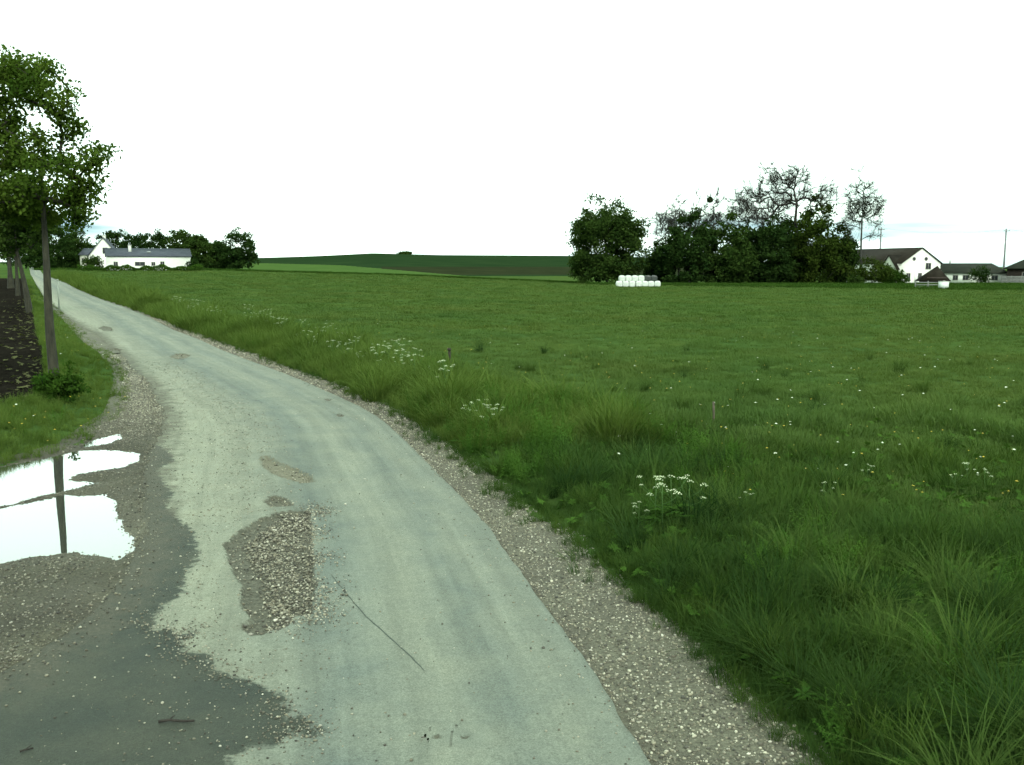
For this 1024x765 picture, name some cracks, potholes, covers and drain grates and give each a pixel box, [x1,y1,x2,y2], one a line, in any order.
crack [332,576,425,671]
pothole [207,507,334,645]
pothole [249,453,327,486]
